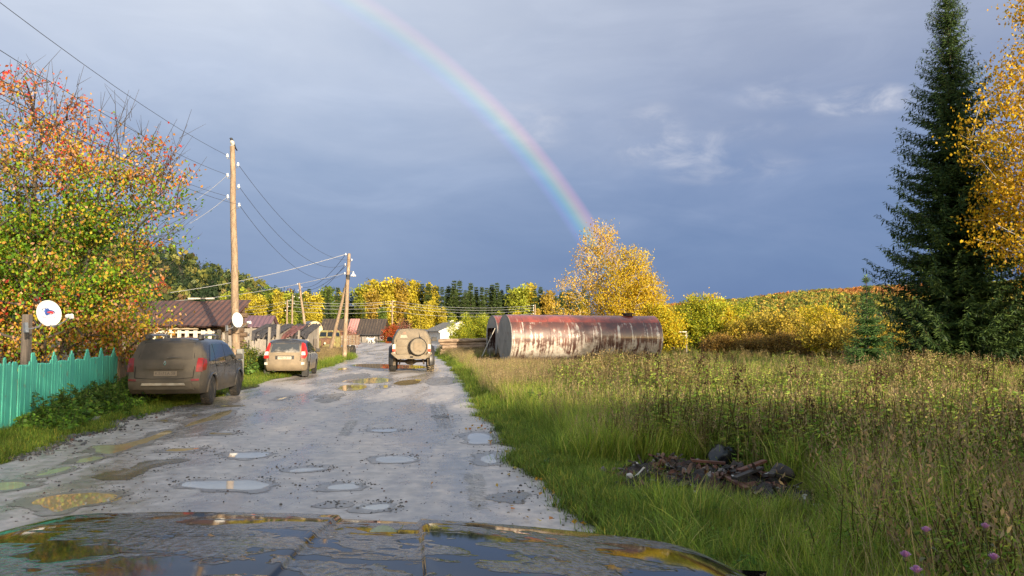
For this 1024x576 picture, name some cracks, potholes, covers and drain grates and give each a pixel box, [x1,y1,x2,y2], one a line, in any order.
pothole [365,455,419,464]
pothole [470,451,504,466]
pothole [486,491,531,504]
pothole [90,458,190,481]
pothole [170,479,279,493]
pothole [312,481,367,492]
pothole [327,373,370,383]
pothole [455,431,499,445]
pothole [8,490,134,516]
pothole [218,451,276,461]
pothole [280,465,332,473]
pothole [347,502,397,514]
